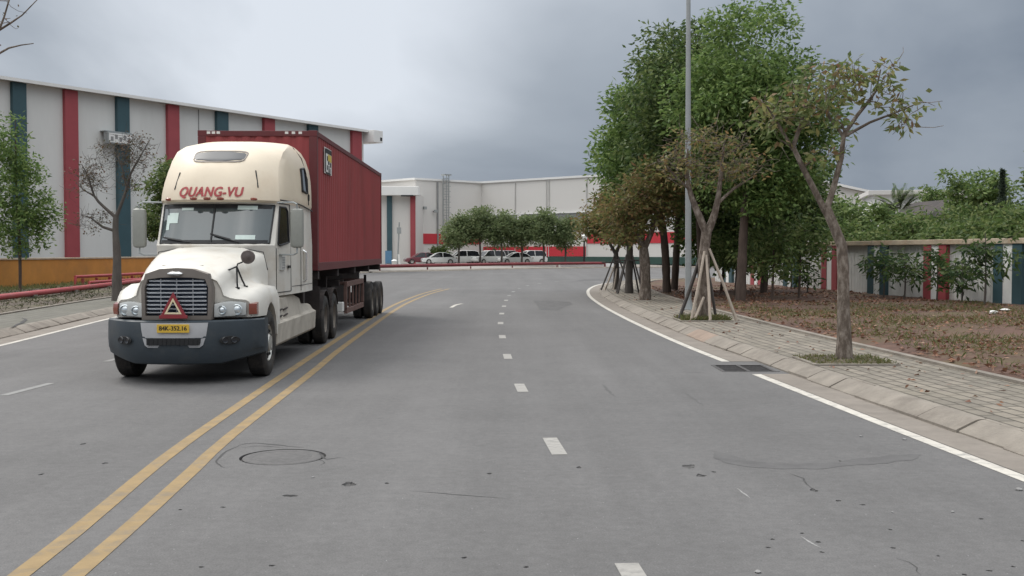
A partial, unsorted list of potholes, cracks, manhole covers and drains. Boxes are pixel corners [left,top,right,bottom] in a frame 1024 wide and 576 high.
manhole cover [239,449,326,465]
